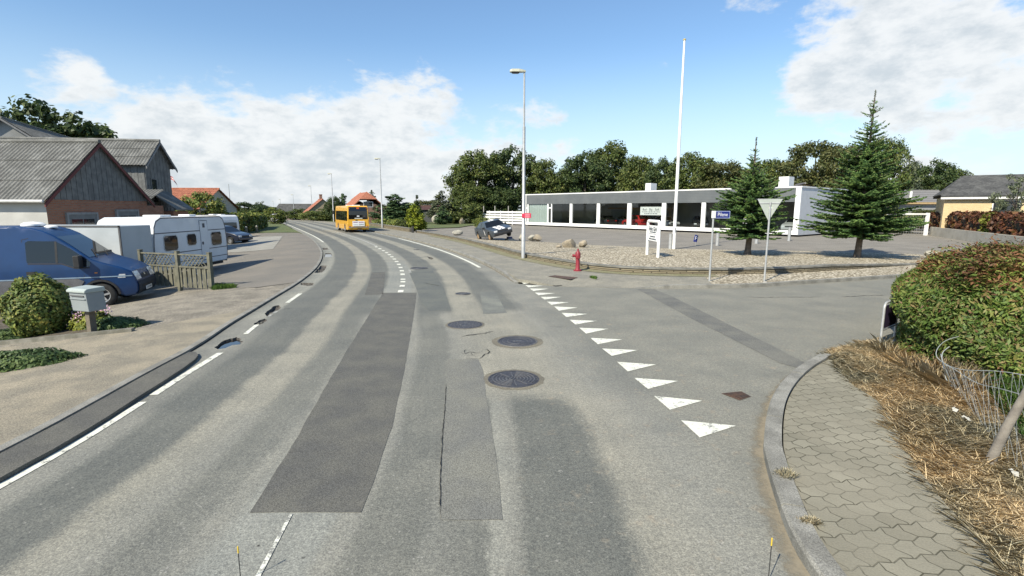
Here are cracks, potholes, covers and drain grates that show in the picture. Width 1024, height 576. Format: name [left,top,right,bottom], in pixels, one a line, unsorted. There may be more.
pothole [215,337,243,349]
manhole cover [445,320,484,329]
drain grate [722,391,750,400]
manhole cover [492,335,544,349]
manhole cover [484,369,544,390]
